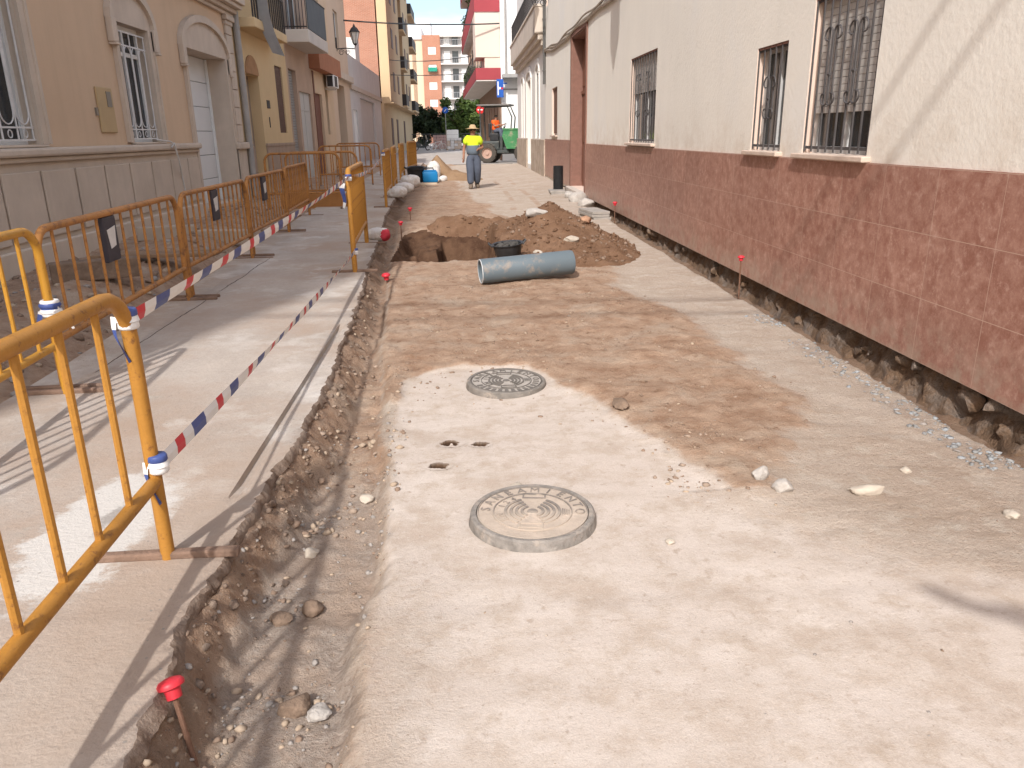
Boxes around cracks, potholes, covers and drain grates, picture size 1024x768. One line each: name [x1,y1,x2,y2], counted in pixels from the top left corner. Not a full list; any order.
pothole [424,461,453,470]
pothole [435,439,465,448]
manhole cover [469,484,597,553]
manhole cover [466,368,546,399]
pothole [468,440,493,448]
